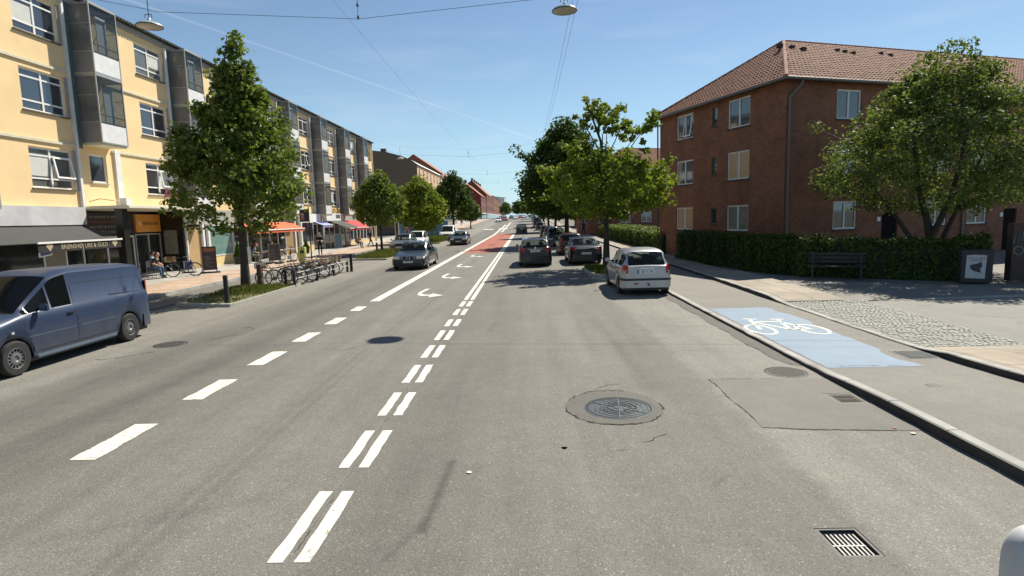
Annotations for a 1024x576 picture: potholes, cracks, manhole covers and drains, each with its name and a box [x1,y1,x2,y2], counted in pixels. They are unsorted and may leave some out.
drain grate [890,350,940,359]
manhole cover [584,397,654,420]
drain grate [828,394,864,403]
crack [566,384,667,450]
drain grate [814,528,886,557]
manhole cover [763,367,809,378]
